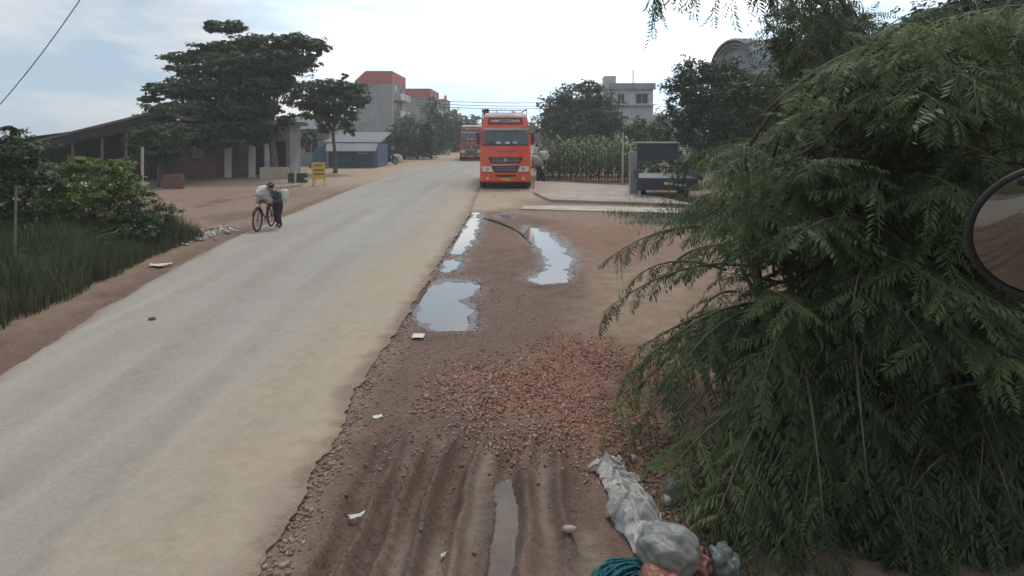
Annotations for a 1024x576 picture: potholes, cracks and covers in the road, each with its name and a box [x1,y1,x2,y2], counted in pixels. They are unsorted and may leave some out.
pothole [410,278,481,332]
pothole [521,226,577,285]
pothole [438,258,465,273]
pothole [448,211,483,255]
